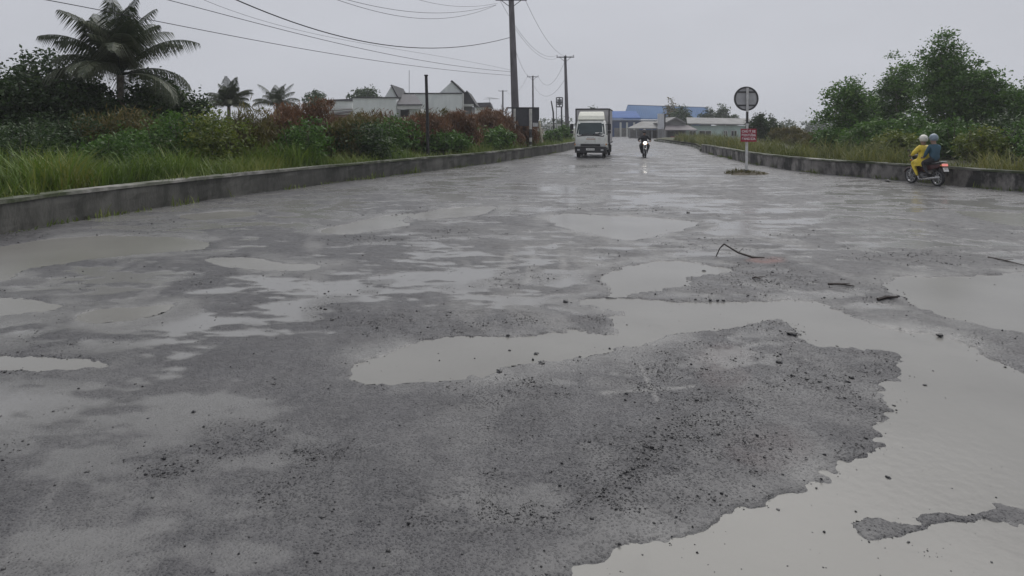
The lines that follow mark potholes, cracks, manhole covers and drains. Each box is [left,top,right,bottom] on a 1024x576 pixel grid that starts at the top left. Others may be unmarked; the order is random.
pothole [881,270,1024,333]
pothole [597,259,736,299]
pothole [0,353,112,373]
pothole [346,318,676,386]
pothole [547,212,699,241]
pothole [541,297,1024,576]
pothole [0,234,212,281]
pothole [319,213,415,235]
